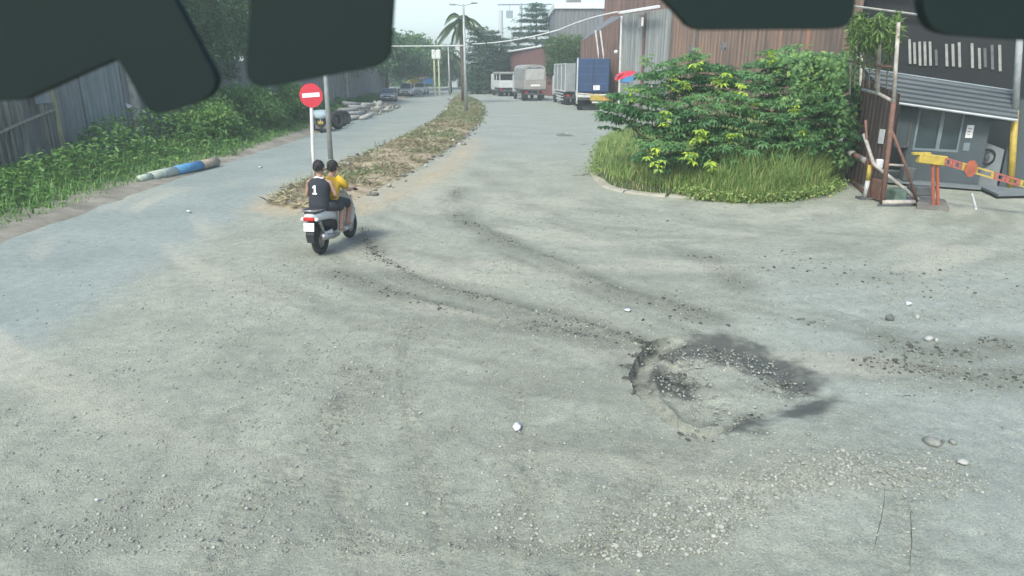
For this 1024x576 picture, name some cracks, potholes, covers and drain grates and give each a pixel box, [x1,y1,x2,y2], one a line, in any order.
crack [873,490,885,550]
pothole [629,334,842,438]
